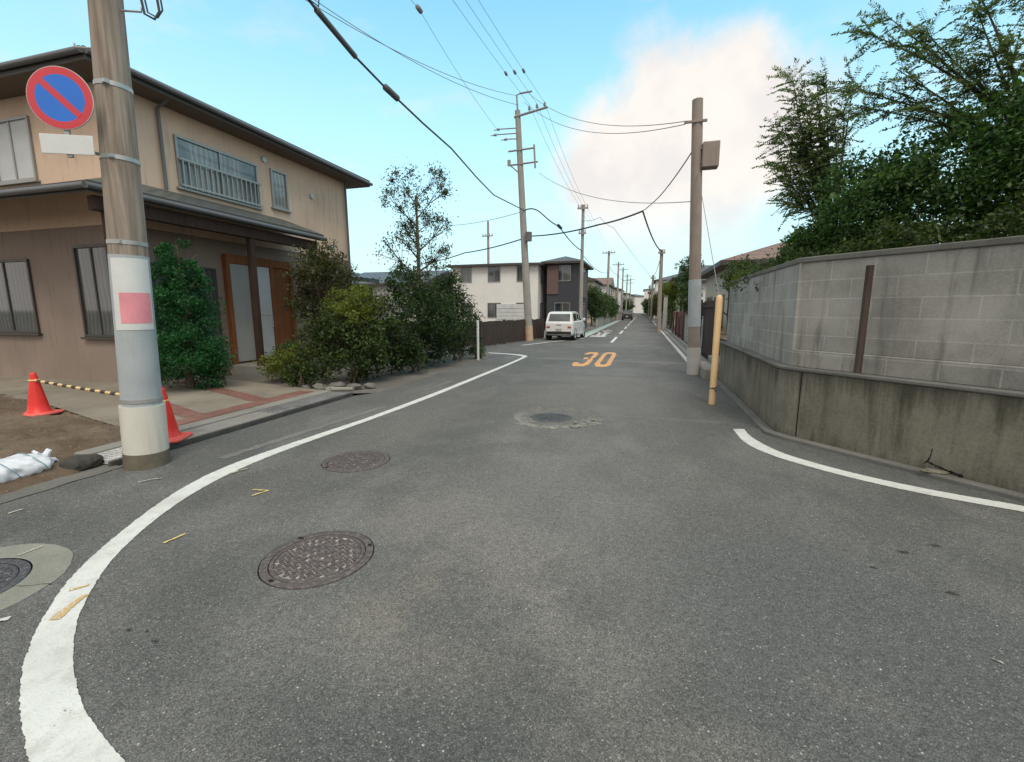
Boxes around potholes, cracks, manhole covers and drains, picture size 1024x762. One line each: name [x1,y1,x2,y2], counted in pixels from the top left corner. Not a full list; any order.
manhole cover [514,405,602,429]
manhole cover [259,531,374,590]
drain grate [97,447,122,464]
manhole cover [322,451,390,473]
